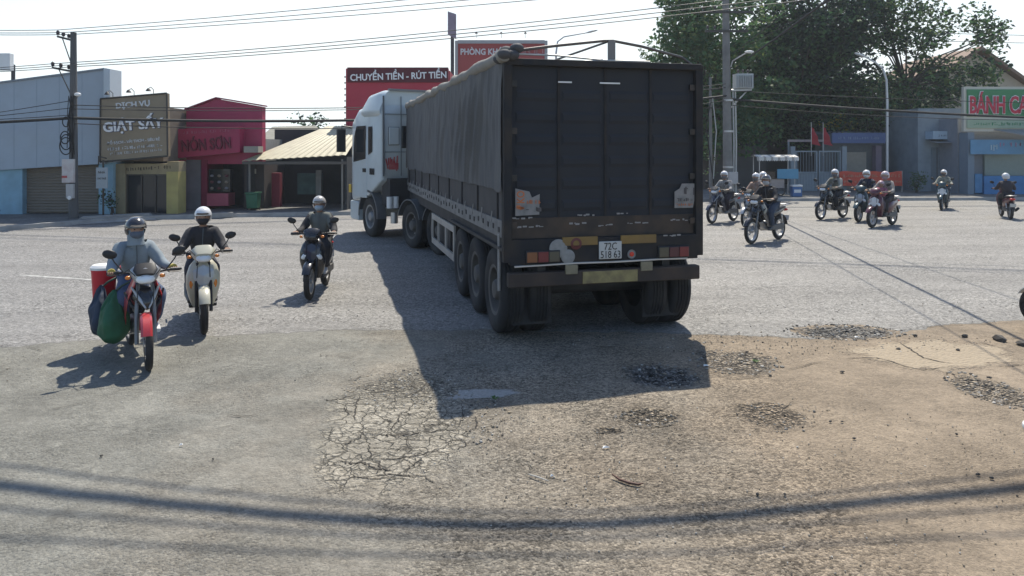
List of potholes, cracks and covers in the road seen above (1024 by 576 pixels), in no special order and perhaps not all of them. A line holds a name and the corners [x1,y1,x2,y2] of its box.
pothole [791,325,900,340]
pothole [946,372,1024,410]
pothole [612,406,686,427]
pothole [618,364,709,390]
crack [290,356,494,513]
pothole [728,399,813,432]
pothole [687,349,781,378]
crack [861,321,1017,369]
